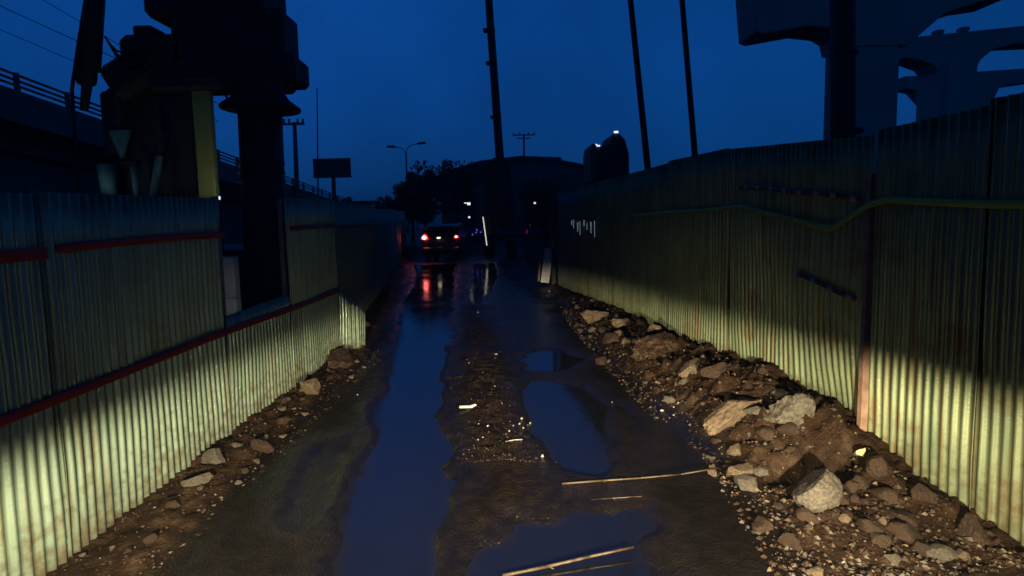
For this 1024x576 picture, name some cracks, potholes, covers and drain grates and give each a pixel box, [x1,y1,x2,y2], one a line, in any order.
pothole [447,497,671,576]
pothole [516,376,619,476]
pothole [514,348,588,372]
